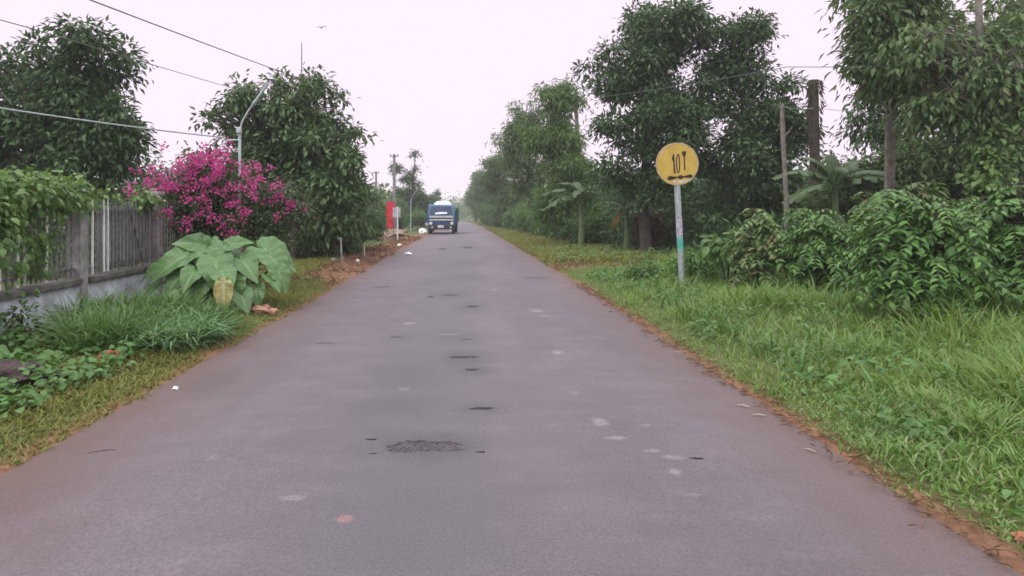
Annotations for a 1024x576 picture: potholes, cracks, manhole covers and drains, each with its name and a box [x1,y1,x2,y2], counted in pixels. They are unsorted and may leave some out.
pothole [365,438,485,454]
